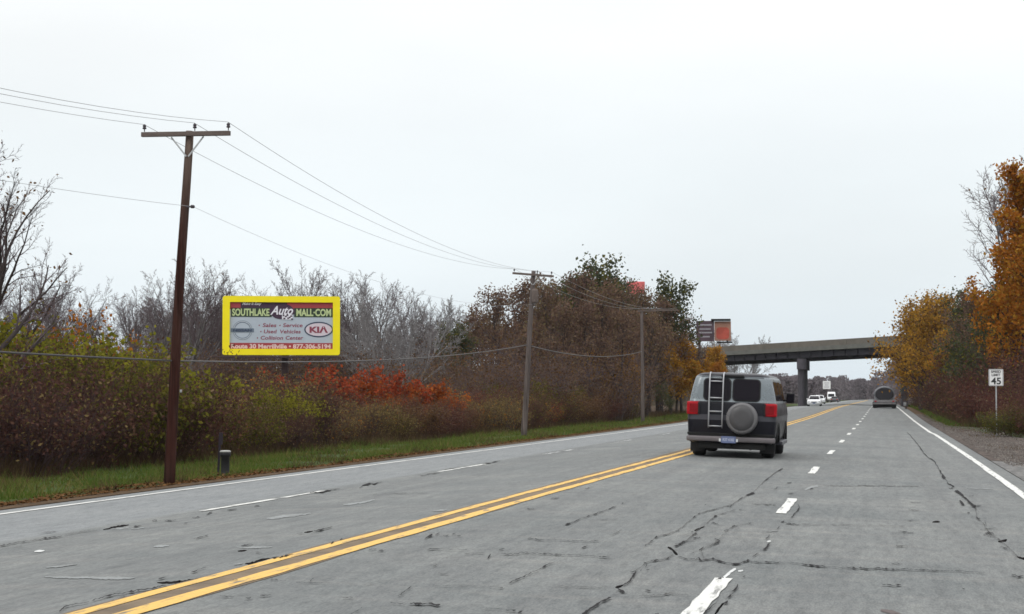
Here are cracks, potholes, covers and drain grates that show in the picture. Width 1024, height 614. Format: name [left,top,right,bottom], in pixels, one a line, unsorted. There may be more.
crack [582,469,912,614]
crack [907,432,1007,549]
